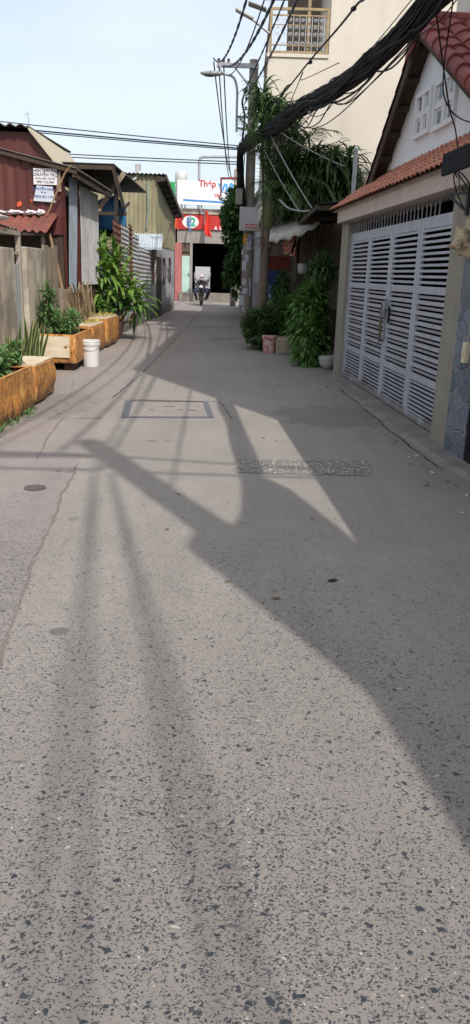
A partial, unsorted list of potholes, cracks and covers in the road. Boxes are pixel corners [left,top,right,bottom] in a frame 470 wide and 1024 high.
crack [36,418,75,459]
manhole cover [121,400,214,418]
